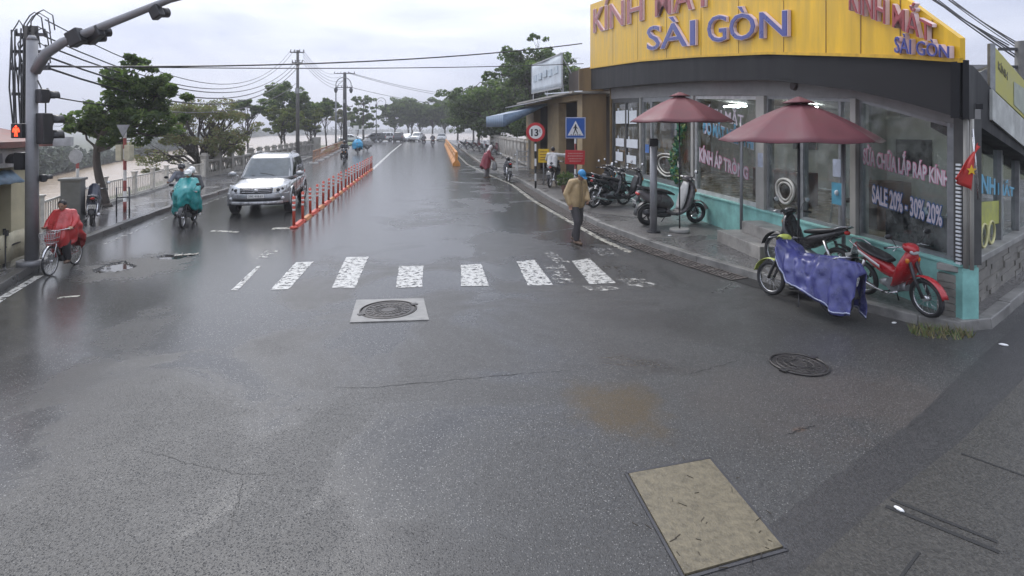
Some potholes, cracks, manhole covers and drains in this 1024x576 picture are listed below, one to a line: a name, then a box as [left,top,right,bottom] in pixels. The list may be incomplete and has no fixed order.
drain grate [628,244,669,255]
pothole [92,261,136,273]
drain grate [606,235,641,245]
crack [346,369,580,388]
drain grate [655,253,703,267]
manhole cover [769,352,830,377]
manhole cover [350,298,429,323]
crack [138,449,285,535]
